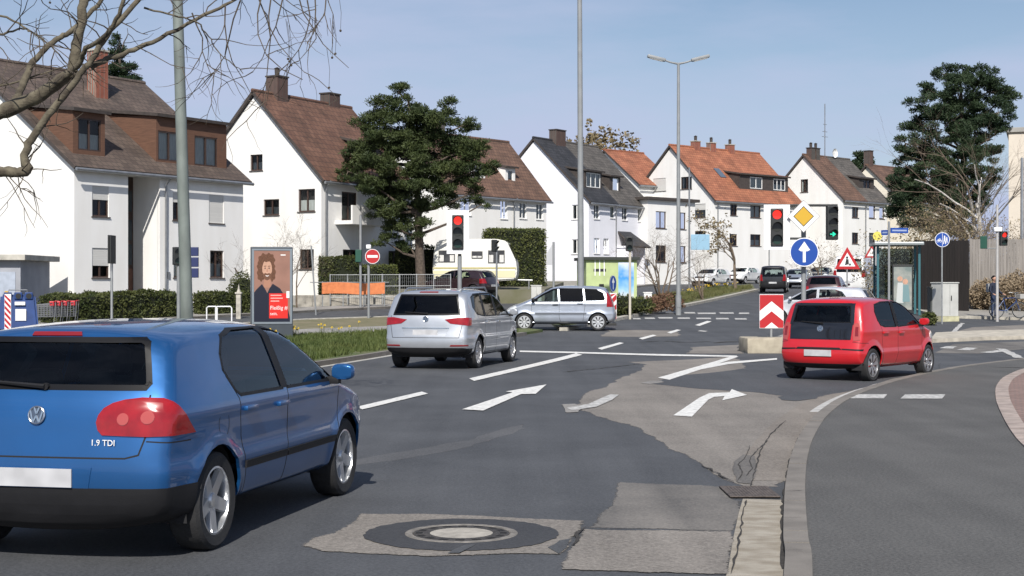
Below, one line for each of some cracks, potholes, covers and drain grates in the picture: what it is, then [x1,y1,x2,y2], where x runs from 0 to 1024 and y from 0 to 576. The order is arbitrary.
manhole cover [363,518,559,550]
crack [731,420,786,572]
drain grate [719,486,781,498]
